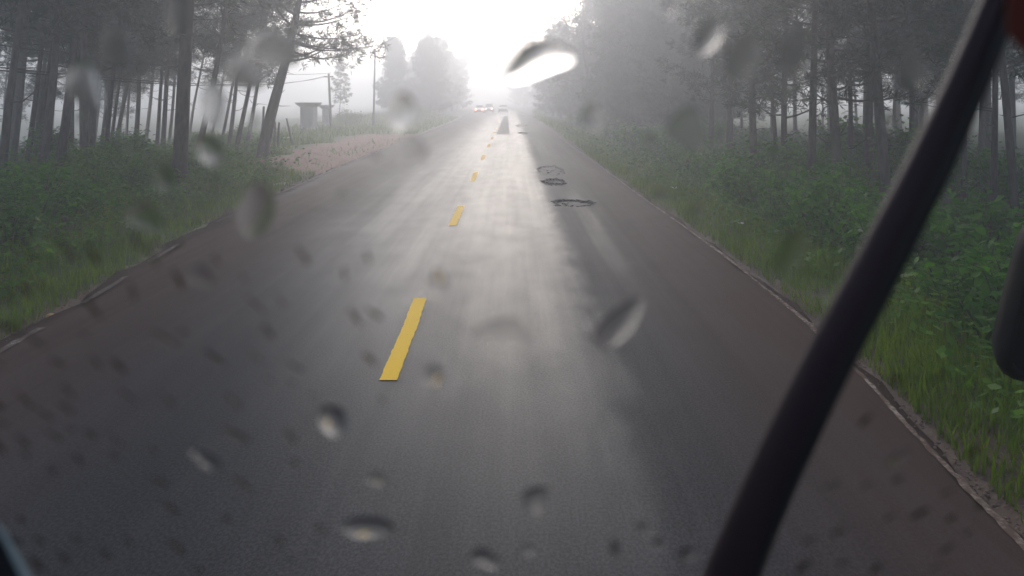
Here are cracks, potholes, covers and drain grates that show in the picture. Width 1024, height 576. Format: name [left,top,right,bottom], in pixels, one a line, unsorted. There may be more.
pothole [548,199,596,207]
pothole [539,178,568,186]
pothole [536,165,567,176]
